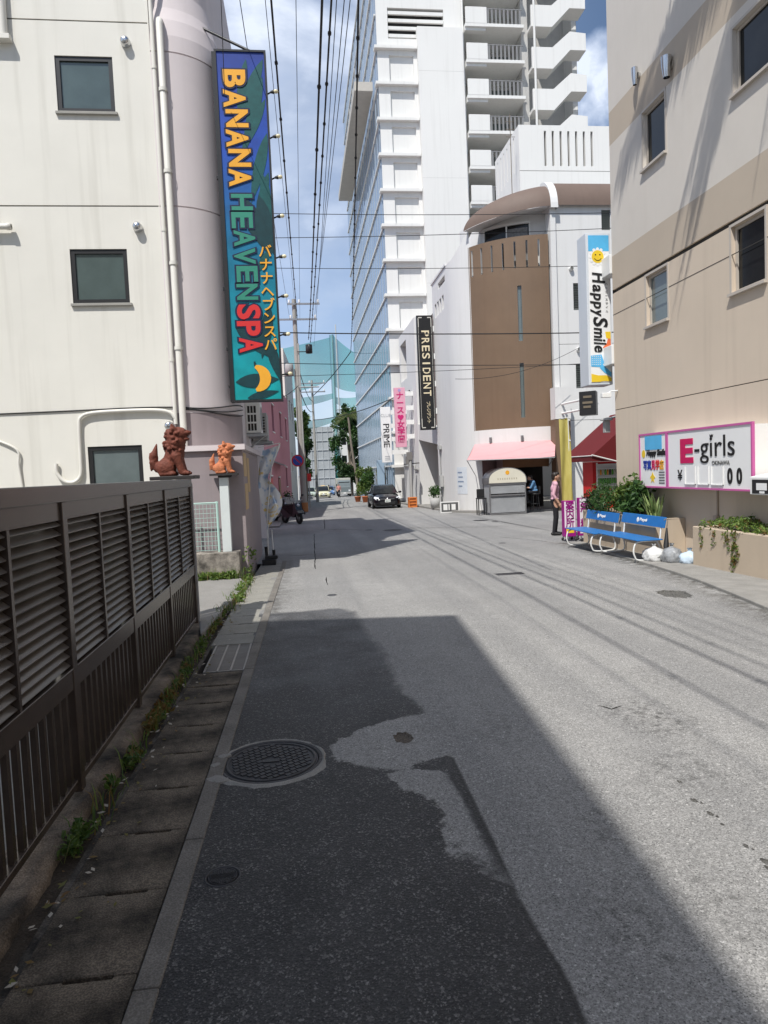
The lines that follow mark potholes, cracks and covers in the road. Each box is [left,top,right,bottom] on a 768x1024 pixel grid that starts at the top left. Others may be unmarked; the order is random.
manhole cover [205,739,326,789]
drain grate [203,643,252,674]
pothole [393,732,414,743]
utility cover [204,866,241,887]
